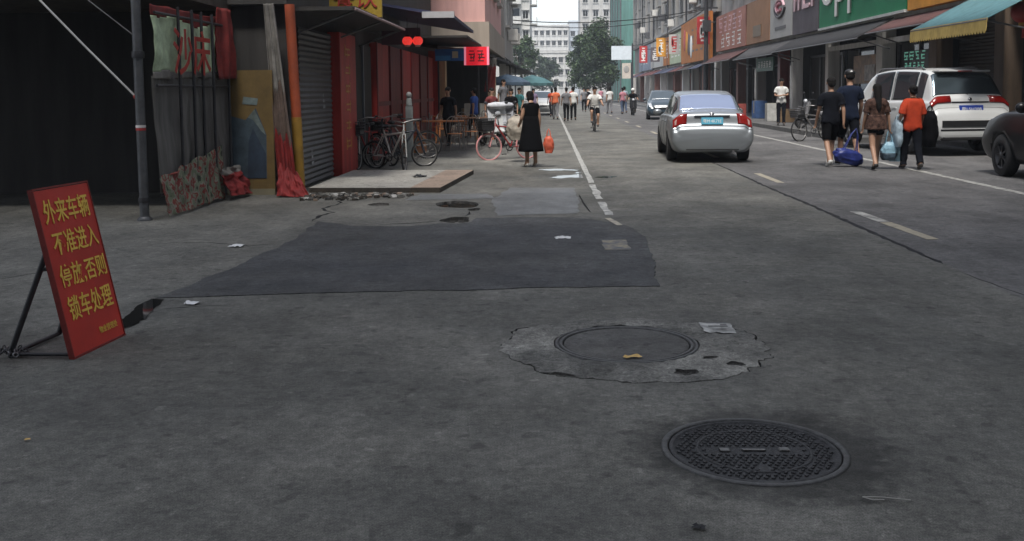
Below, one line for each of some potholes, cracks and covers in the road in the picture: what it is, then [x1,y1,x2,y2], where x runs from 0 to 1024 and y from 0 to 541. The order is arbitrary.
manhole cover [554,326,699,363]
crack [312,200,343,221]
manhole cover [661,418,851,487]
